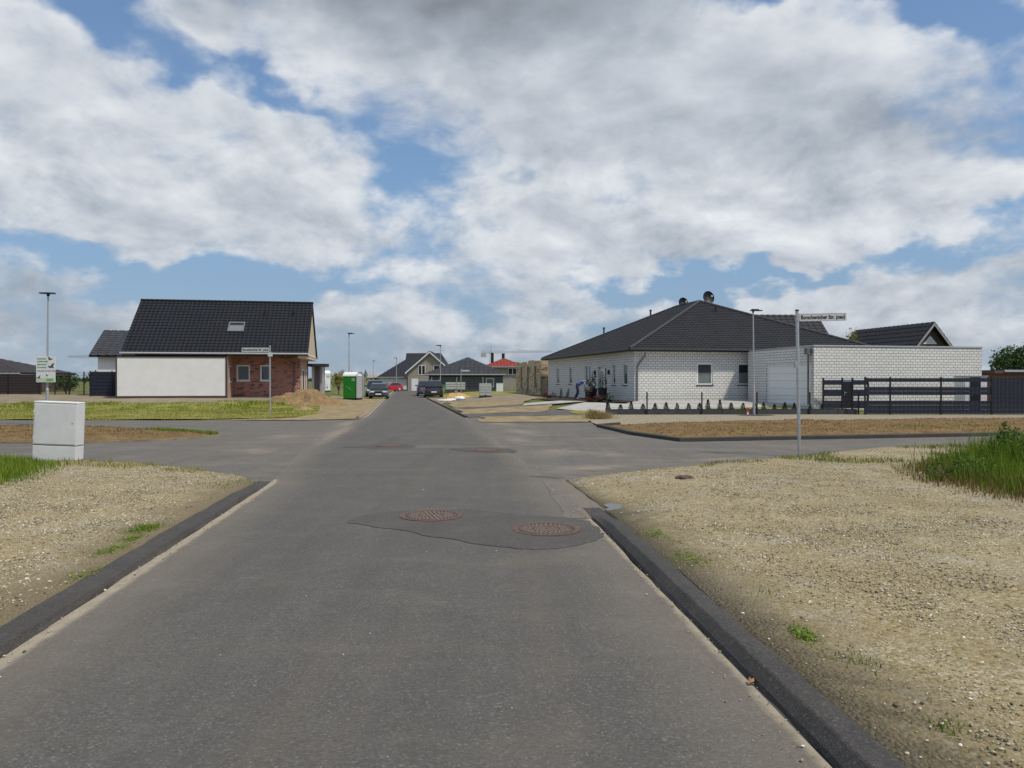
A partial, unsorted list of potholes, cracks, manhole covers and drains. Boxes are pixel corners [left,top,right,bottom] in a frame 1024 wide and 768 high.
manhole cover [400,509,462,521]
manhole cover [512,522,580,536]
